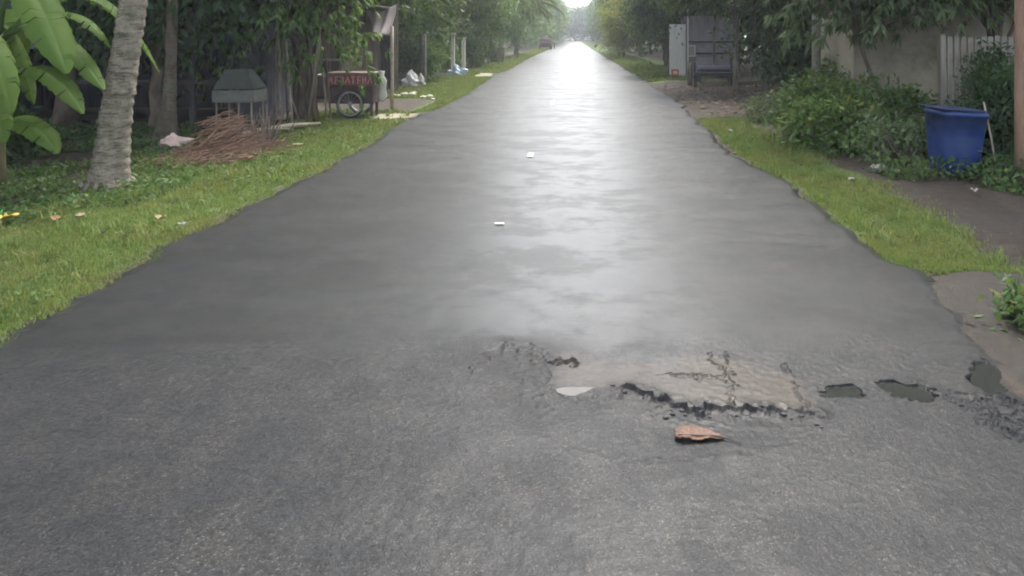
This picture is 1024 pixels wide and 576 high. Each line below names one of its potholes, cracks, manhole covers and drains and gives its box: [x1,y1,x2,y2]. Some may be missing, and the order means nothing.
pothole [966,357,1012,396]
crack [781,362,811,411]
pothole [819,383,866,402]
pothole [875,379,942,404]
crack [657,351,741,406]
